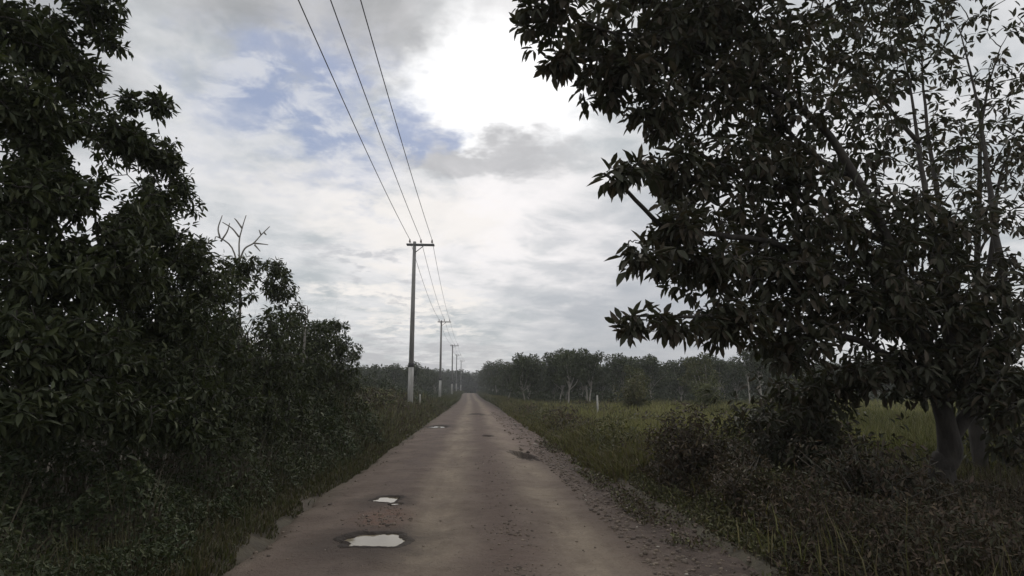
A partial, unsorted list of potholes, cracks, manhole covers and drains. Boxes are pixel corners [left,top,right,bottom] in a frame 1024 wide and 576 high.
pothole [368,495,406,504]
pothole [333,530,415,549]
pothole [506,450,541,461]
